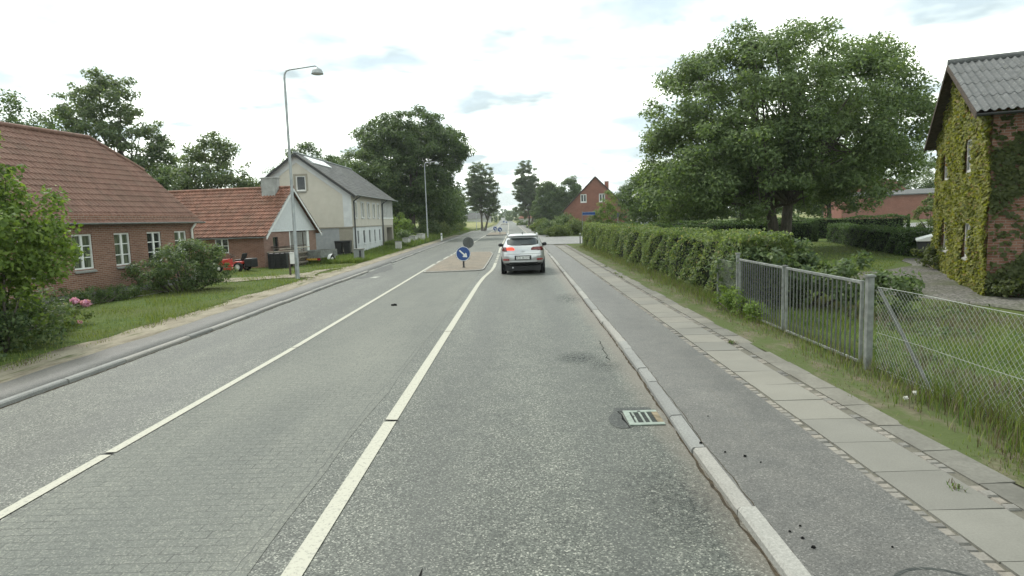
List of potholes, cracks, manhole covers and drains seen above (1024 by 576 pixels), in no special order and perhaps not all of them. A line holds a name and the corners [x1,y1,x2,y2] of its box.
crack [548,250,793,576]
drain grate [622,410,666,426]
